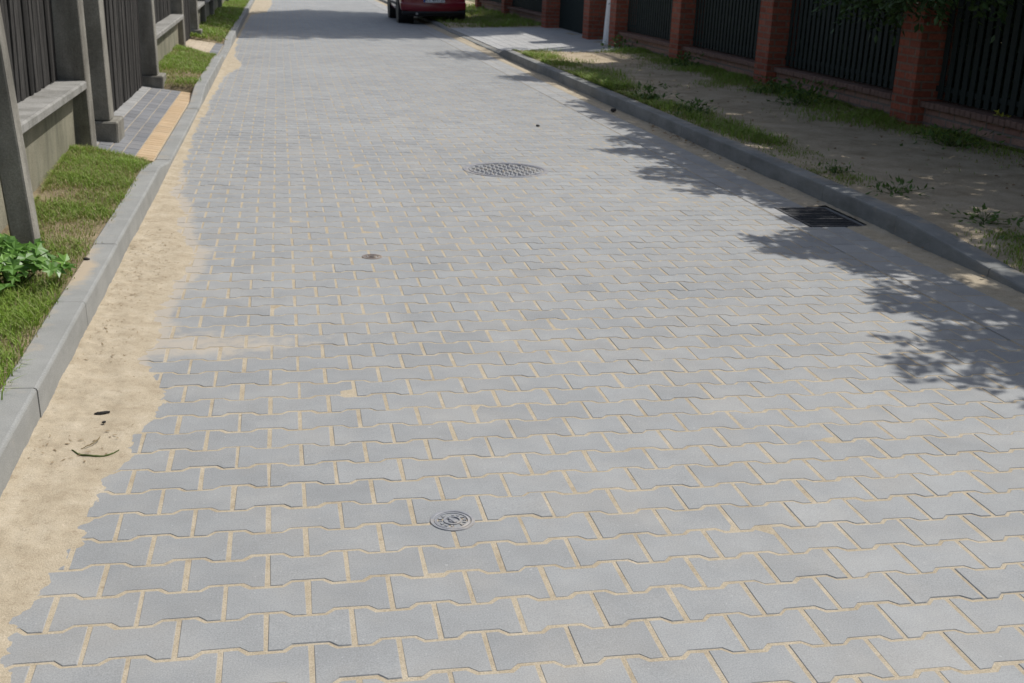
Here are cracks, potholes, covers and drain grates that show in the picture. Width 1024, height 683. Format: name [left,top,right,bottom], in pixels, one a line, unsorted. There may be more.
utility cover [430,510,475,532]
manhole cover [462,162,548,178]
drain grate [774,207,863,227]
